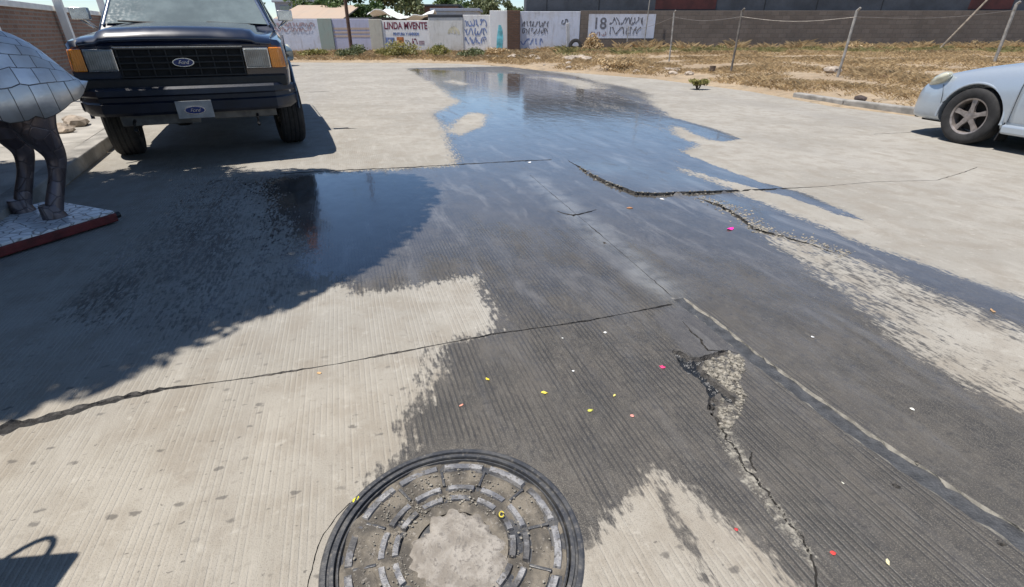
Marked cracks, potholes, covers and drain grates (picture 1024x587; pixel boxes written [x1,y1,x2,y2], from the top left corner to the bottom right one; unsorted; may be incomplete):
manhole cover [318,449,585,587]
pothole [672,322,747,429]
crack [558,160,977,258]
crack [708,403,818,587]
